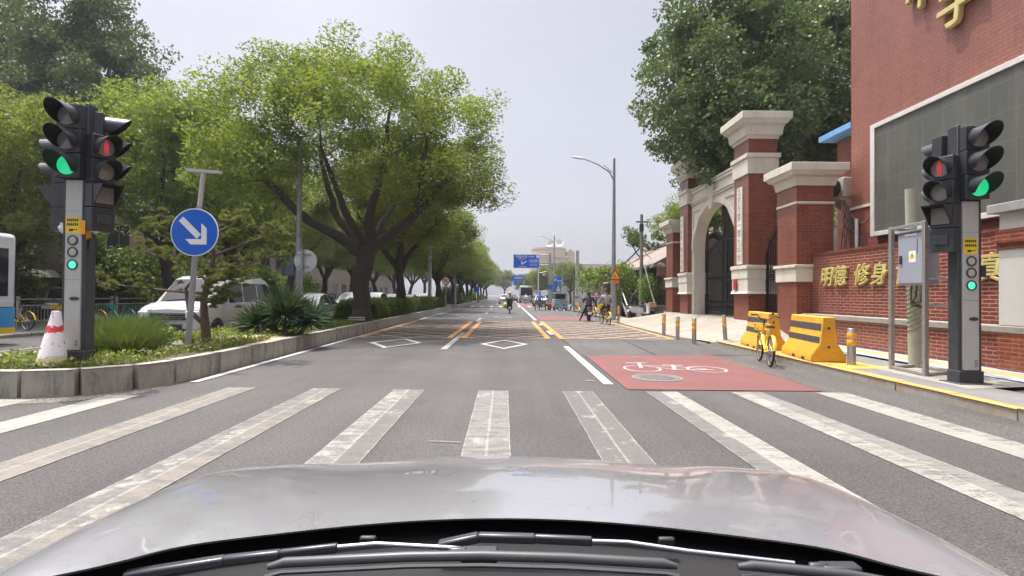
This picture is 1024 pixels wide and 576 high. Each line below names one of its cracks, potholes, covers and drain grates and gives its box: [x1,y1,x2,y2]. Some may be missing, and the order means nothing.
manhole cover [632,374,684,382]
